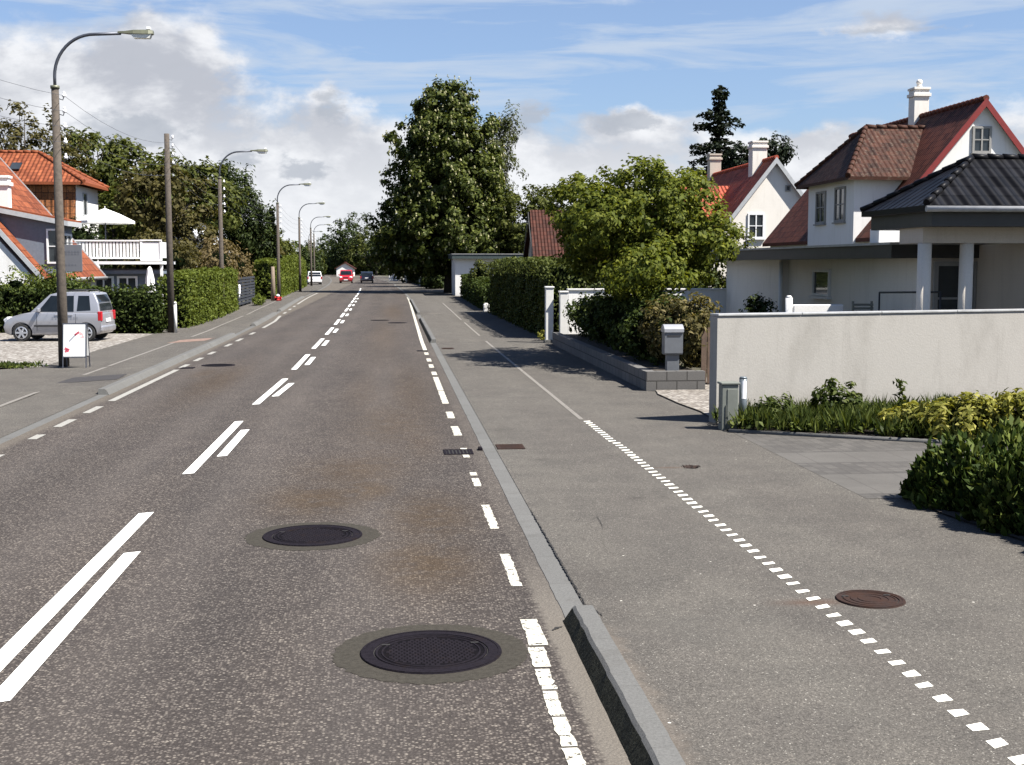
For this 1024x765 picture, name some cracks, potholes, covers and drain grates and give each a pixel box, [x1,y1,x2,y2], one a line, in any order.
manhole cover [835,590,906,609]
manhole cover [244,522,381,551]
manhole cover [331,624,529,684]
